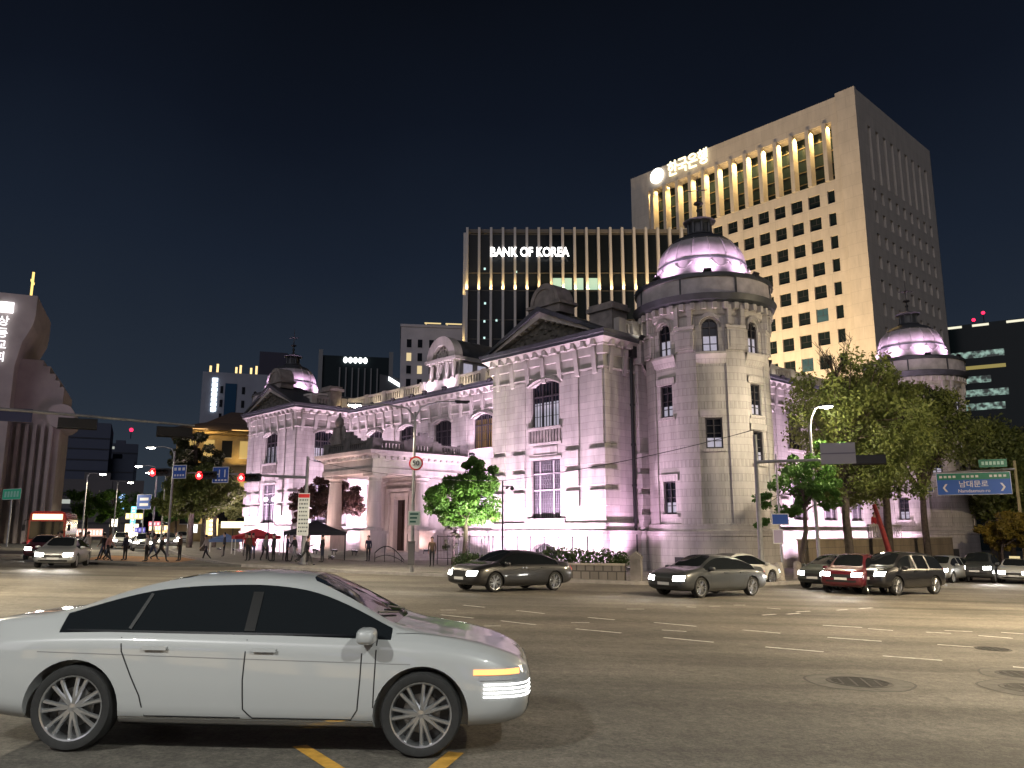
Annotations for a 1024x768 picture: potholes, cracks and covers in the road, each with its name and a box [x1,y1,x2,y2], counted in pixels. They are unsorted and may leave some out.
manhole cover [977,668,1024,681]
manhole cover [975,679,1024,696]
manhole cover [803,674,917,692]
